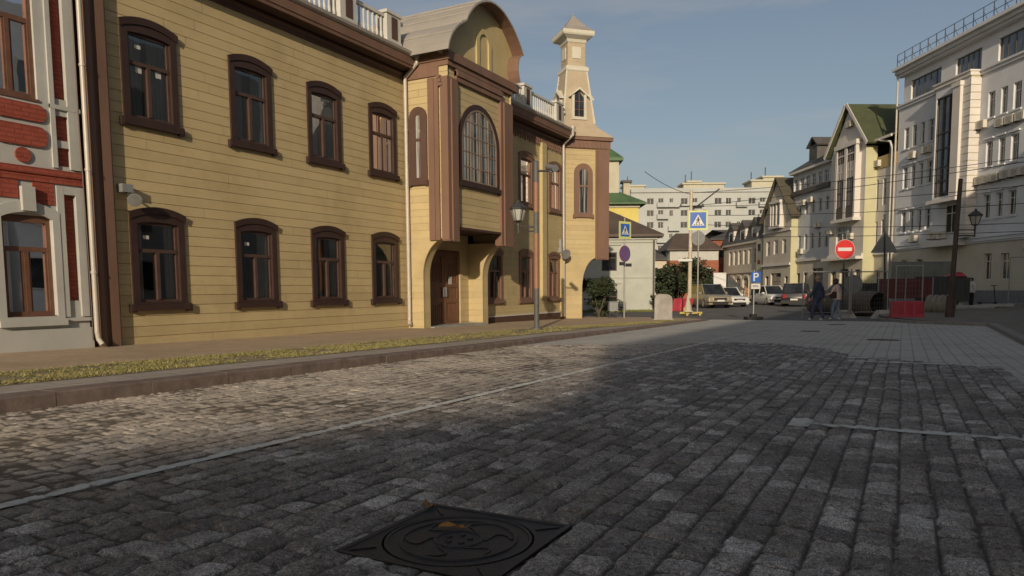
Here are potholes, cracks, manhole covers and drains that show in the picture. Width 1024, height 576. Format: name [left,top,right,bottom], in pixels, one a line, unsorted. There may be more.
manhole cover [334,504,572,576]
